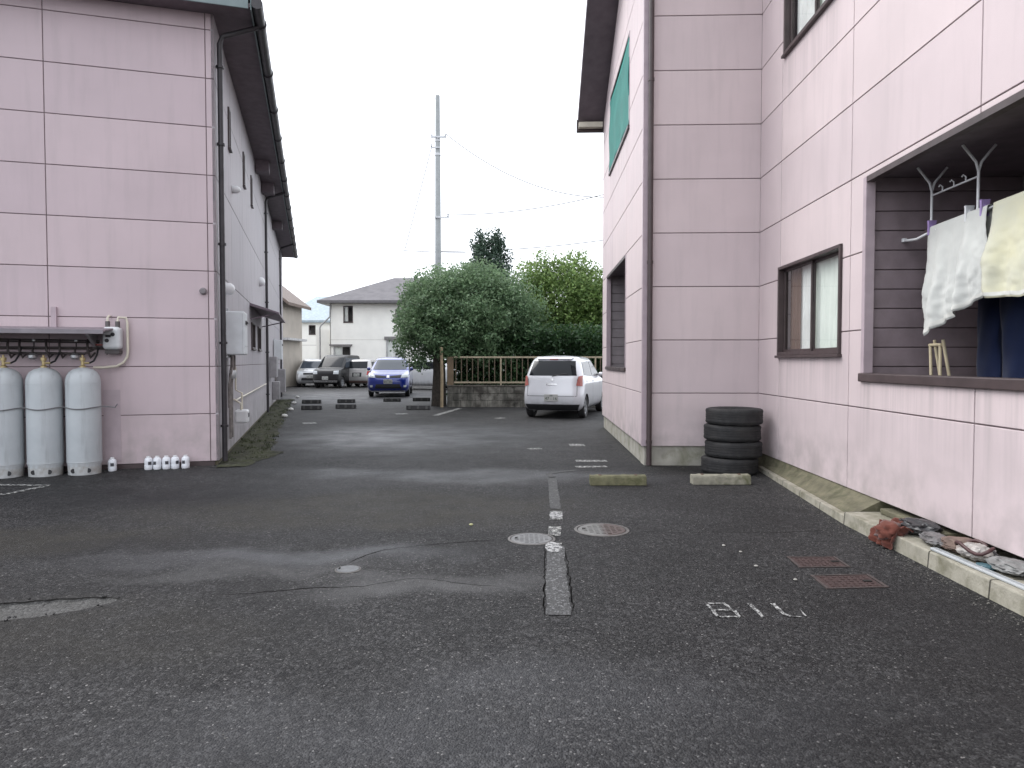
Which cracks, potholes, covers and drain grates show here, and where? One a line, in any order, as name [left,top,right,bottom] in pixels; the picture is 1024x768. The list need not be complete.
manhole cover [810,574,889,589]
manhole cover [335,565,361,574]
manhole cover [574,523,629,537]
manhole cover [508,533,555,545]
crack [220,578,488,595]
crack [351,540,490,562]
manhole cover [787,556,851,568]
